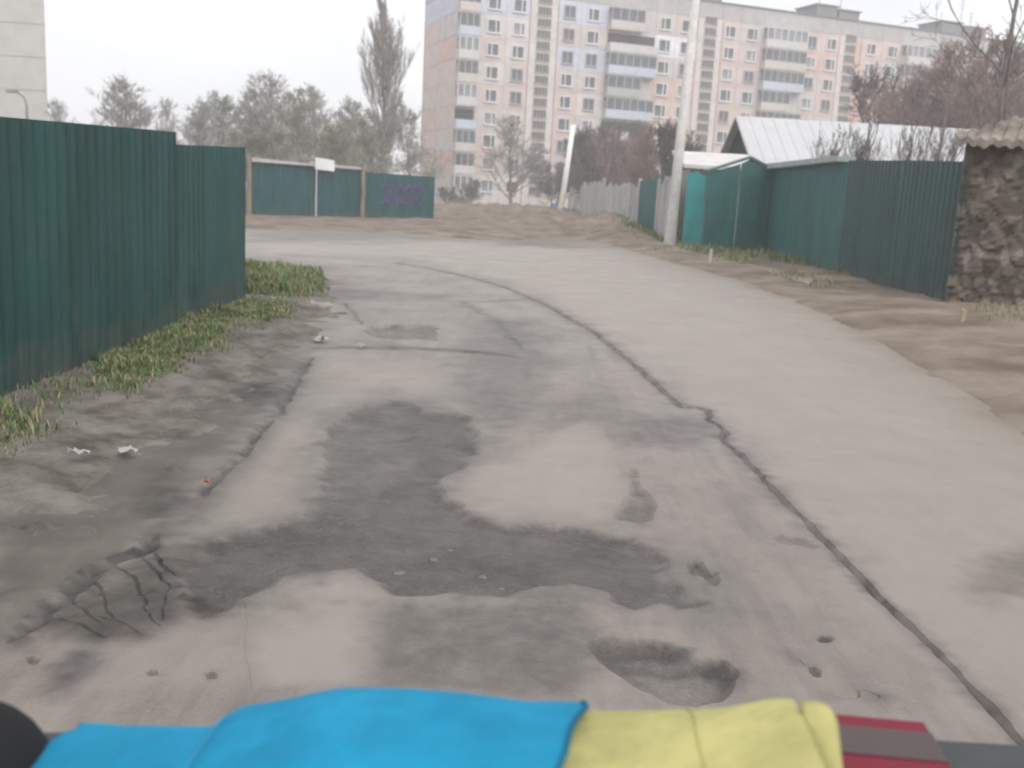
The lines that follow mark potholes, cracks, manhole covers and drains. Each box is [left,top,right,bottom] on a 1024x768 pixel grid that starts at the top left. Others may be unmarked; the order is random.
crack [272,299,527,416]
crack [6,534,179,644]
crack [828,688,881,701]
